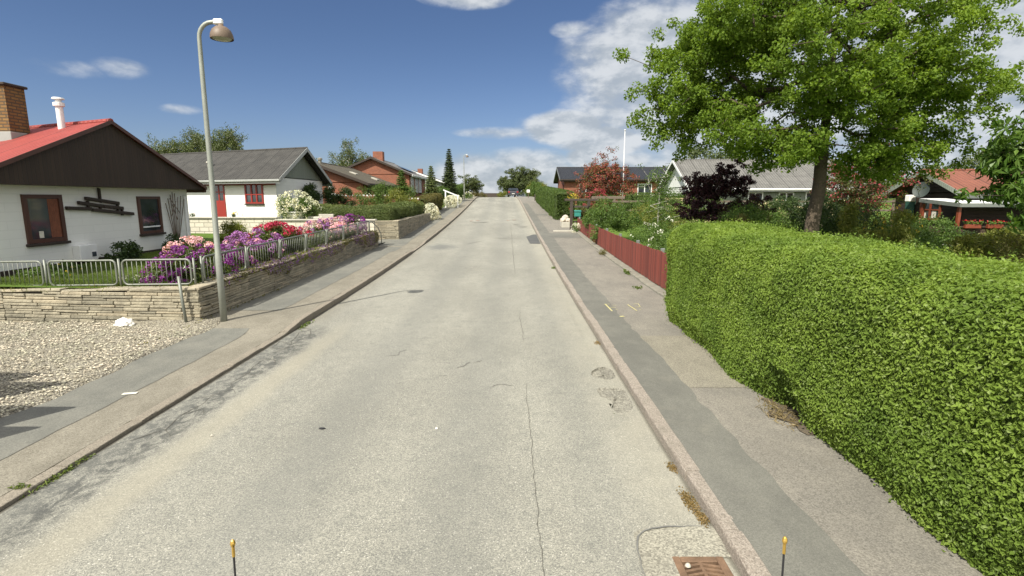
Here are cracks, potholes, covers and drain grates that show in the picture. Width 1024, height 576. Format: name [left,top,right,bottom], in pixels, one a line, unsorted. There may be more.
crack [493,382,545,576]
drain grate [672,556,734,576]
